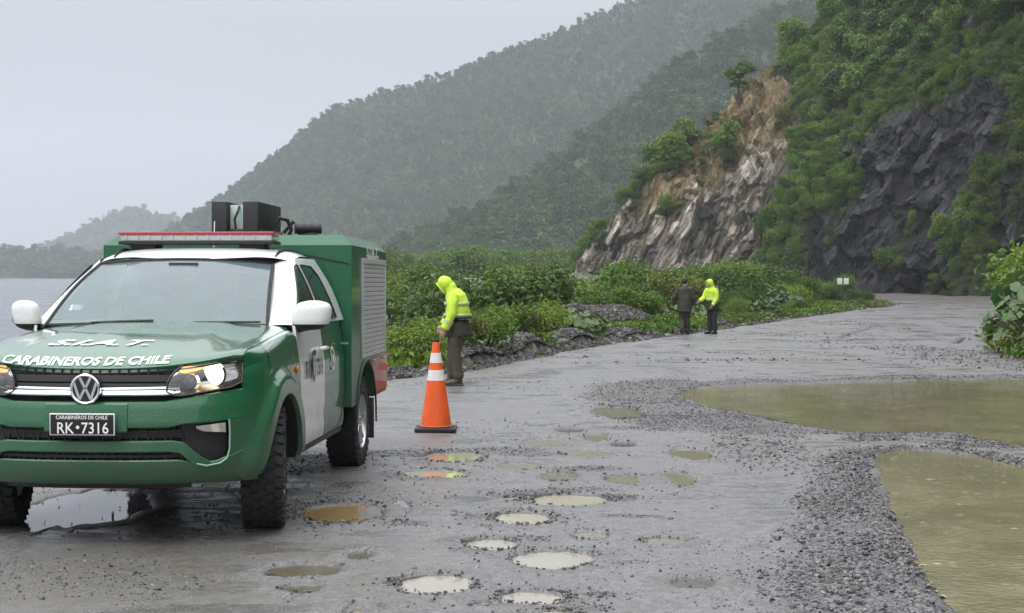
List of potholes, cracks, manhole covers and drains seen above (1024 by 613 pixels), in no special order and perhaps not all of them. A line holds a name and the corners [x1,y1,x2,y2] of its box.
pothole [466,509,574,529]
pothole [650,446,735,463]
pothole [402,449,505,465]
pothole [378,467,493,481]
pothole [0,488,182,538]
pothole [620,533,711,550]
pothole [369,568,501,599]
pothole [440,534,541,556]
pothole [575,406,661,420]
pothole [286,500,408,528]
pothole [234,557,370,587]
pothole [486,546,623,574]
